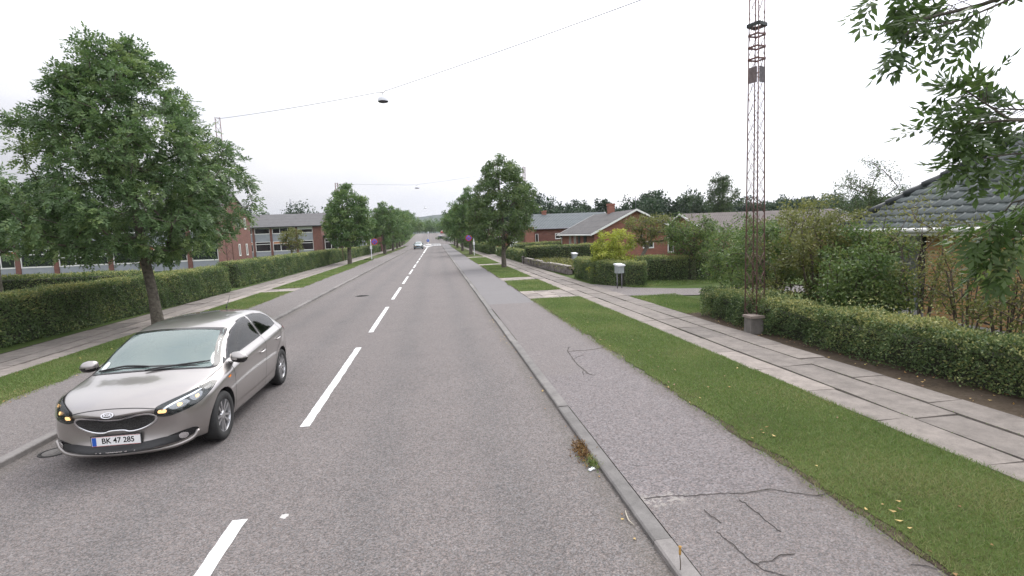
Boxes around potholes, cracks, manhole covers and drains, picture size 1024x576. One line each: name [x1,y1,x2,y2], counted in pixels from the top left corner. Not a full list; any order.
crack [567,347,604,375]
manhole cover [37,448,62,458]
crack [644,488,828,576]
